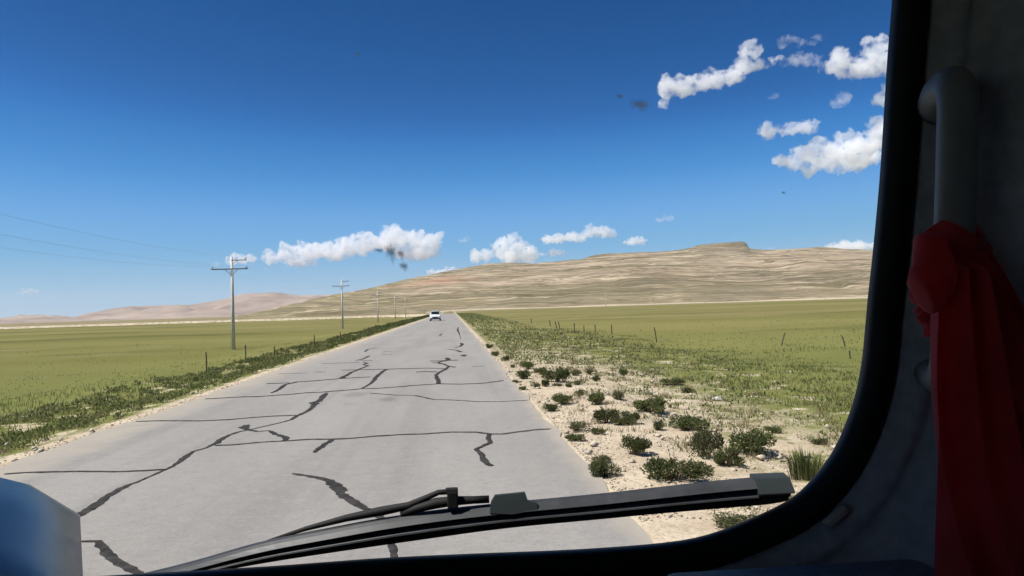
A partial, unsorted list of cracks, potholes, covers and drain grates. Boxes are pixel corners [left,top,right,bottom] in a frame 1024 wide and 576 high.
crack [439,327,476,367]
crack [321,348,393,364]
crack [371,393,527,402]
crack [81,540,144,574]
